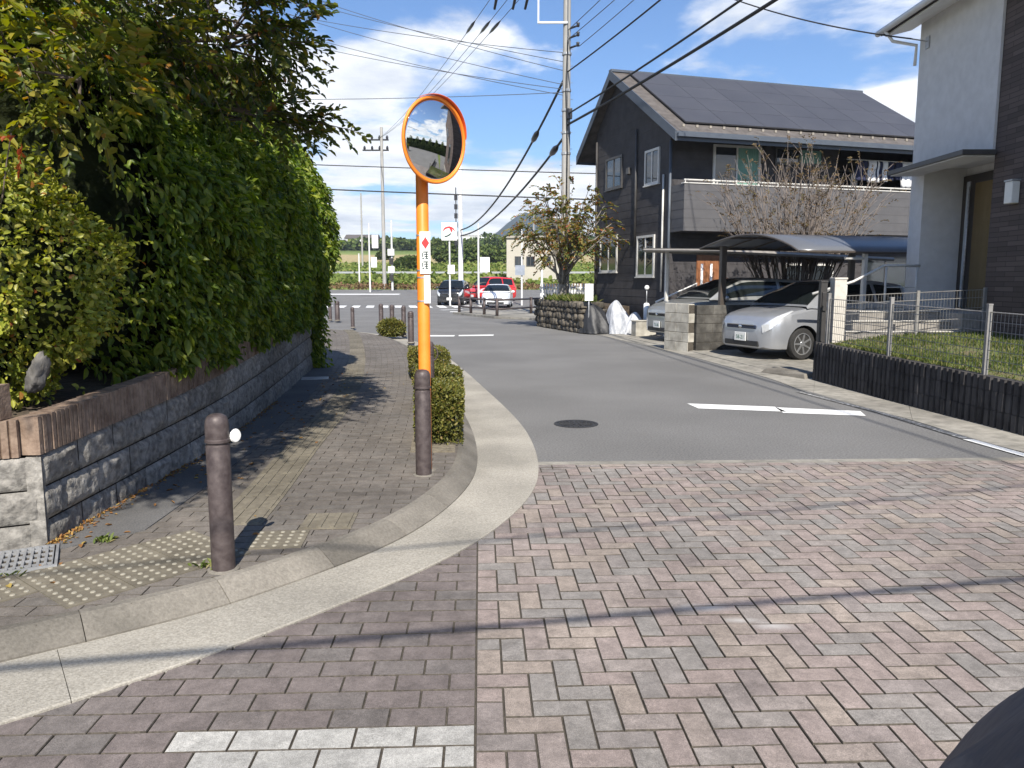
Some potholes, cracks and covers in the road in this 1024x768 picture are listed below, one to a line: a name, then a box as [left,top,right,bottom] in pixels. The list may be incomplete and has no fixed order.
manhole cover [554,420,598,428]
drain grate [0,543,60,576]
